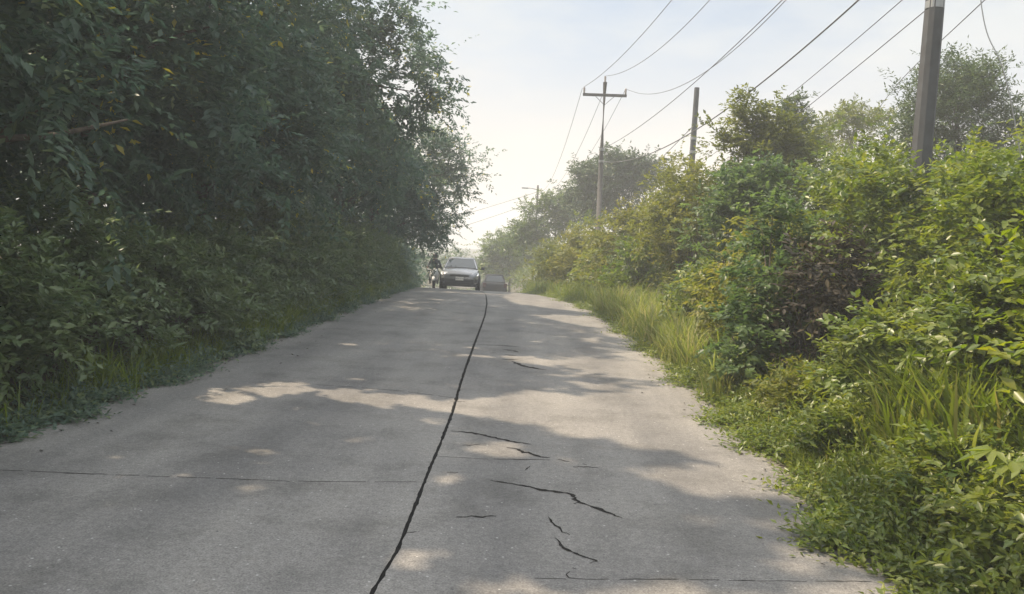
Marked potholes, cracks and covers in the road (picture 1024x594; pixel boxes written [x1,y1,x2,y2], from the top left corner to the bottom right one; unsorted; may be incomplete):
crack [456,431,622,579]
crack [502,349,545,370]
